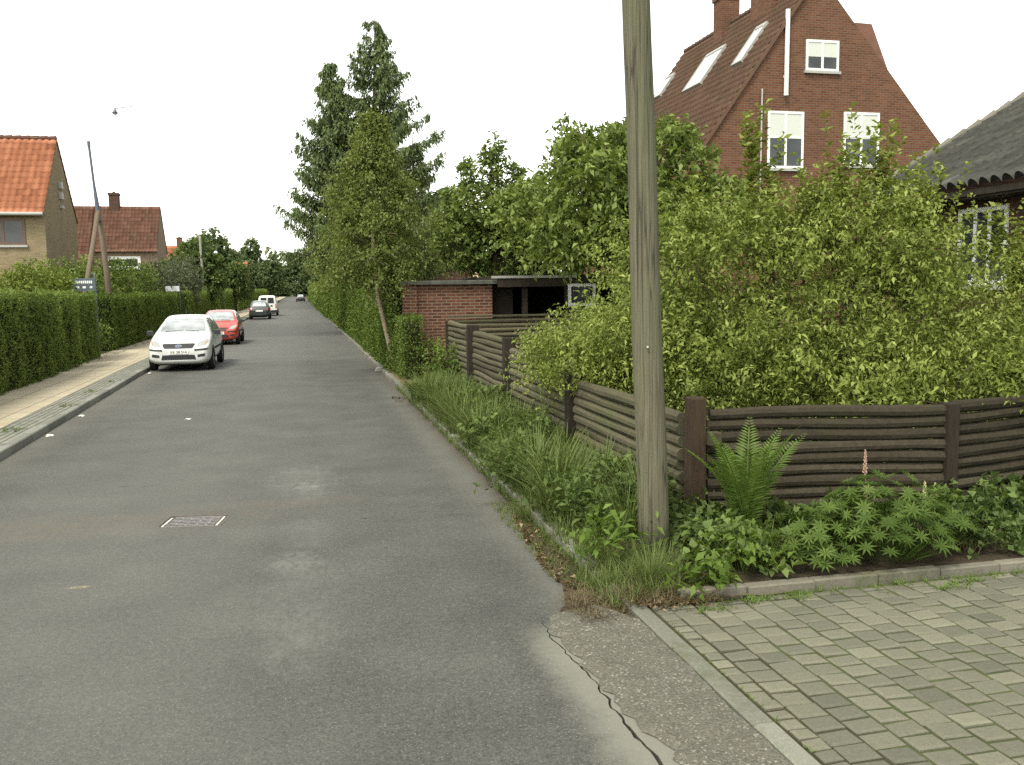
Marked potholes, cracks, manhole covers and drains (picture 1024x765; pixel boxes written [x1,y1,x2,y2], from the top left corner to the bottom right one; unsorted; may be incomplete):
drain grate [155,514,232,528]
crack [541,619,663,765]
